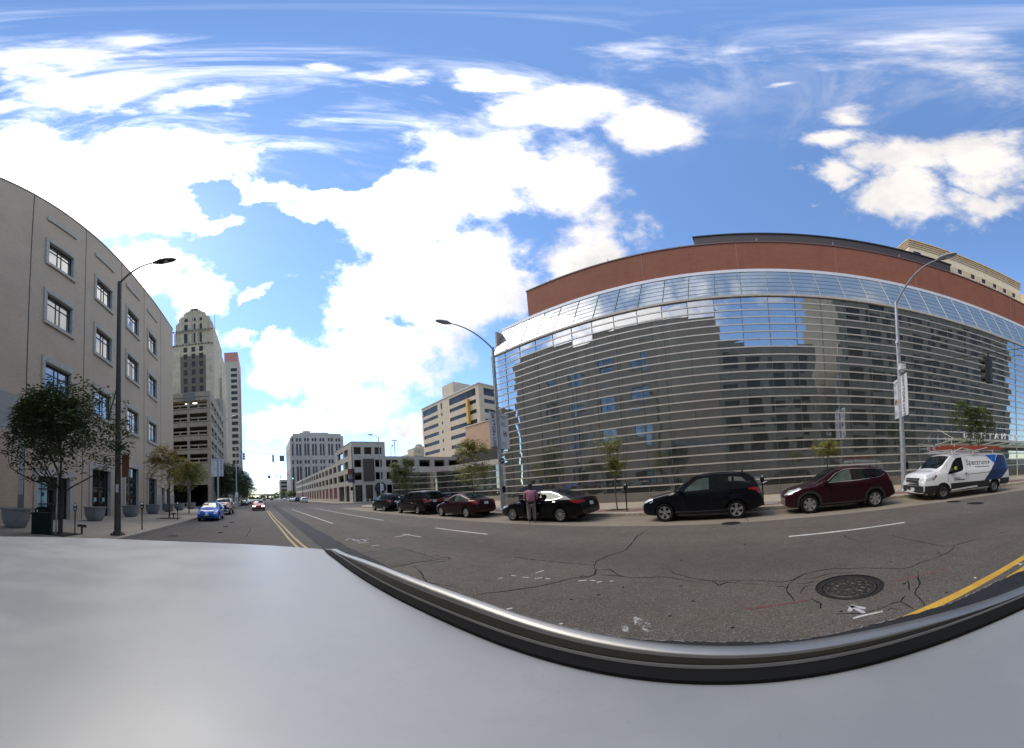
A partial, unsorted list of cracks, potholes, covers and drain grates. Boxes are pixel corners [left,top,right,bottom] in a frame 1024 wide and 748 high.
crack [474,533,694,596]
crack [663,532,1004,614]
crack [371,548,454,587]
manhole cover [815,575,885,600]
